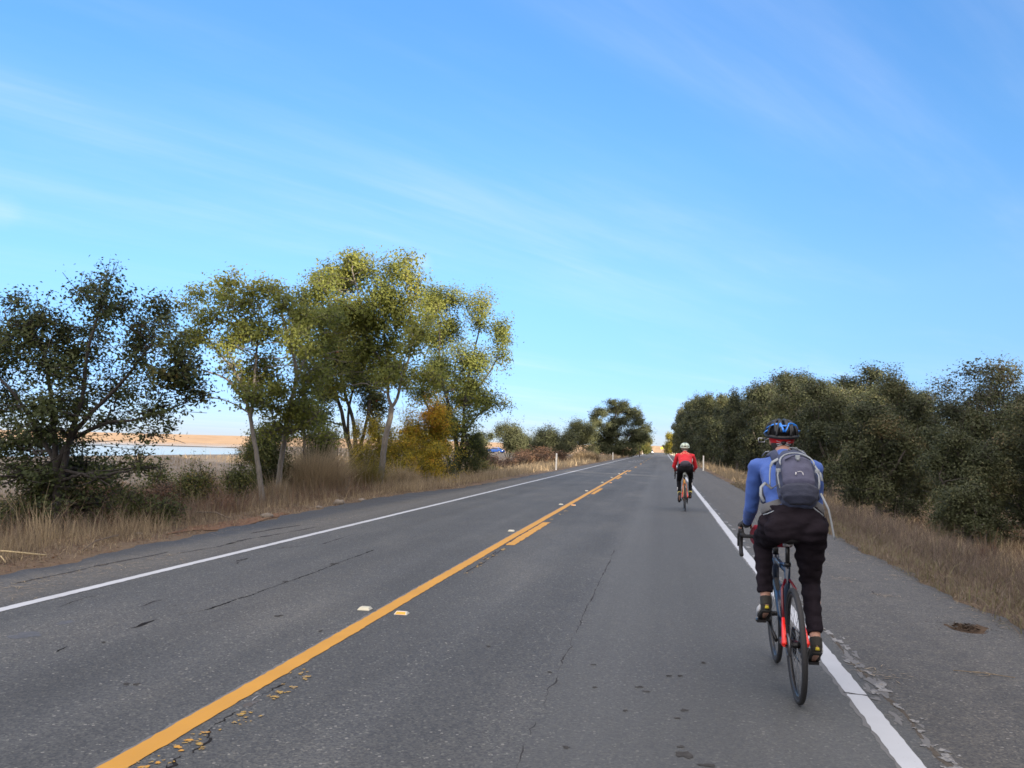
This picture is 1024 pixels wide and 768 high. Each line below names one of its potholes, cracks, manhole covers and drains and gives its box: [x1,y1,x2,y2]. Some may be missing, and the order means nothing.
crack [17,525,344,583]
crack [166,677,296,768]
crack [181,550,373,615]
crack [544,551,614,703]
pothole [926,616,1003,638]
